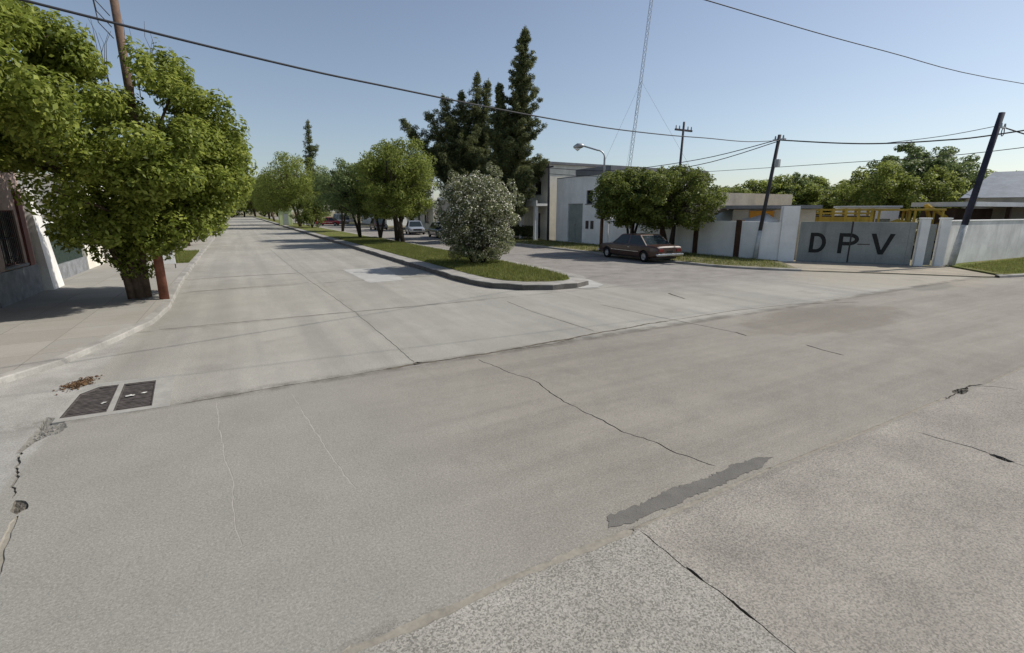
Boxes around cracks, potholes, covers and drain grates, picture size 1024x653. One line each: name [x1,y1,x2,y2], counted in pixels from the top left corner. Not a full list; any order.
crack [182,293,847,488]
crack [216,404,243,551]
drain grate [114,381,156,411]
drain grate [61,385,119,418]
pothole [10,500,29,514]
